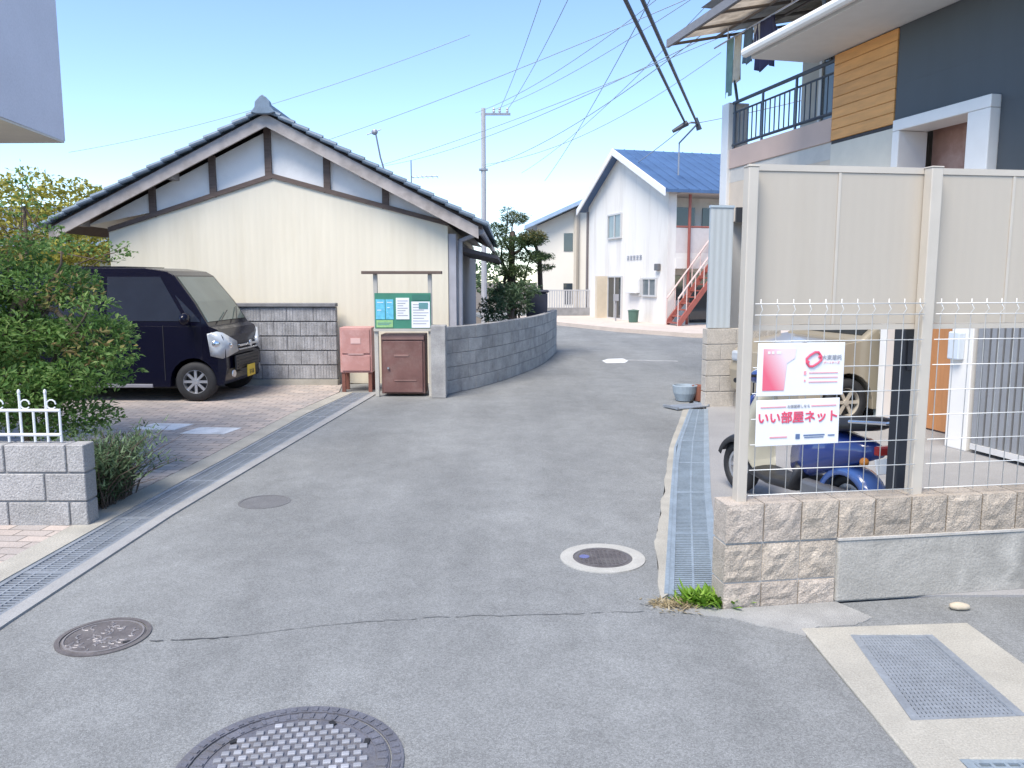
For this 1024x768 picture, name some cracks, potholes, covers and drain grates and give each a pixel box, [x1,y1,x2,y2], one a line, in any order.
manhole cover [560,543,645,574]
manhole cover [175,706,404,768]
manhole cover [54,617,152,657]
crack [149,610,643,641]
manhole cover [238,495,291,509]
